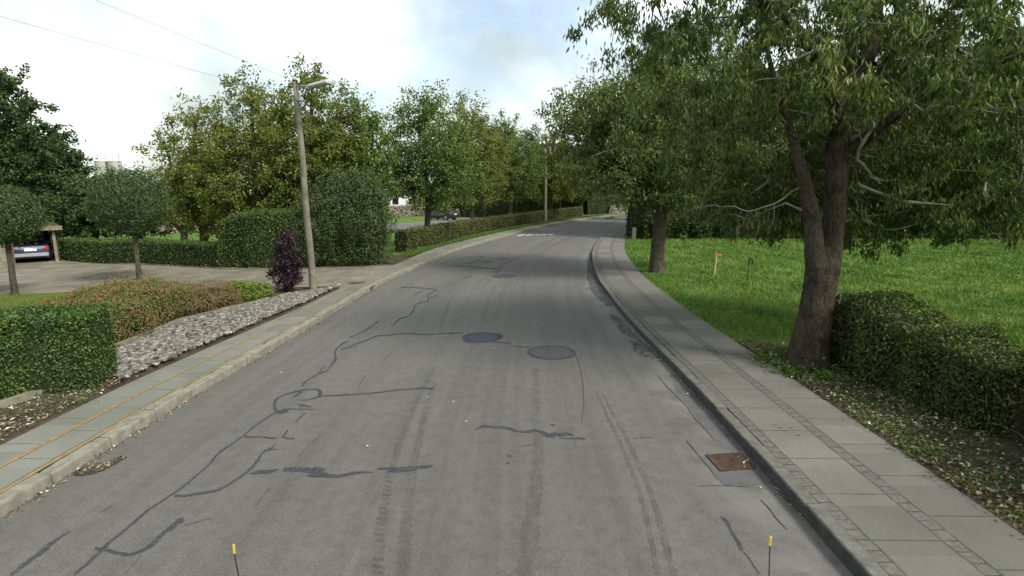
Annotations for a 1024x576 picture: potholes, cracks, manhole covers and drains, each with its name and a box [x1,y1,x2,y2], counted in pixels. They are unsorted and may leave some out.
pothole [73,456,127,476]
manhole cover [462,332,503,343]
manhole cover [527,345,576,360]
drain grate [706,452,758,472]
